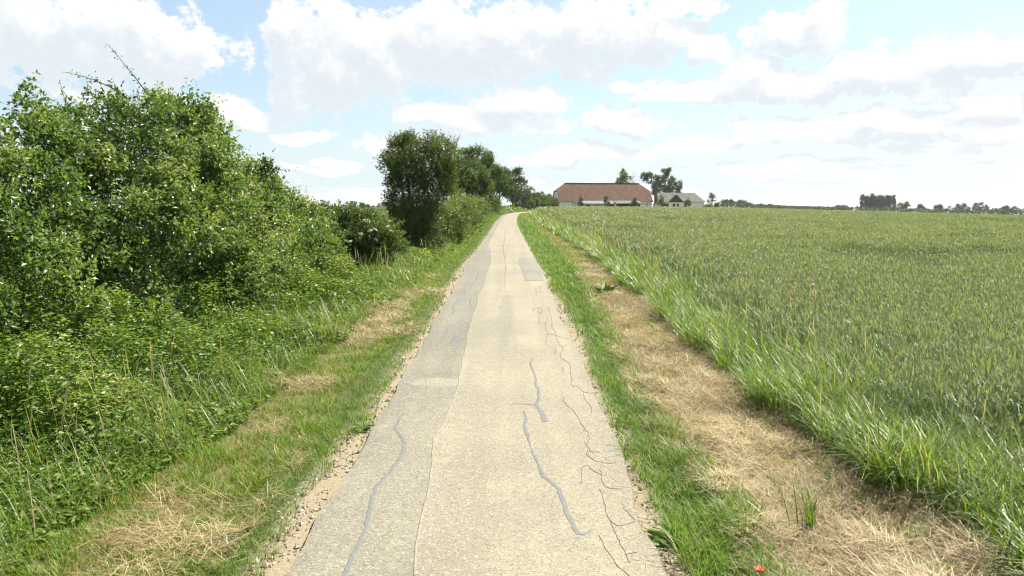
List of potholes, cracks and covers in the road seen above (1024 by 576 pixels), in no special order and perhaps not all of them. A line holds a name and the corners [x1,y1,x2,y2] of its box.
crack [535,289,637,573]
